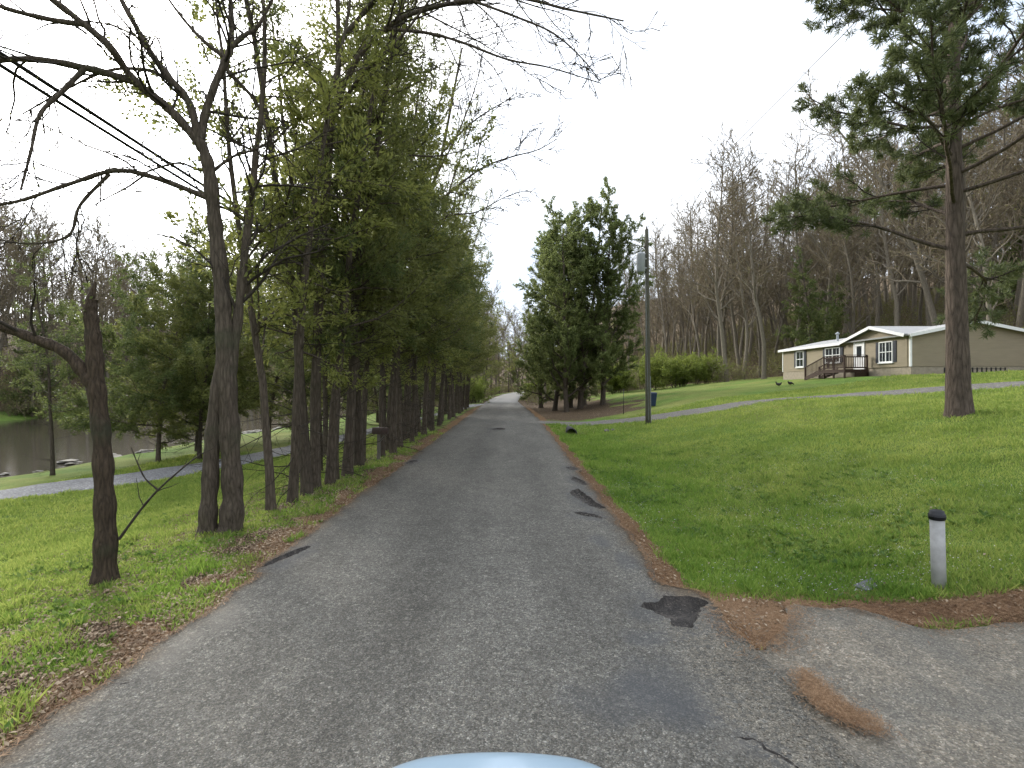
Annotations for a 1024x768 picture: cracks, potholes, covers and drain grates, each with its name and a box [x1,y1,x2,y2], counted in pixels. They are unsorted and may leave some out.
pothole [562,488,608,509]
pothole [262,546,311,567]
crack [734,737,799,768]
pothole [633,593,713,628]
